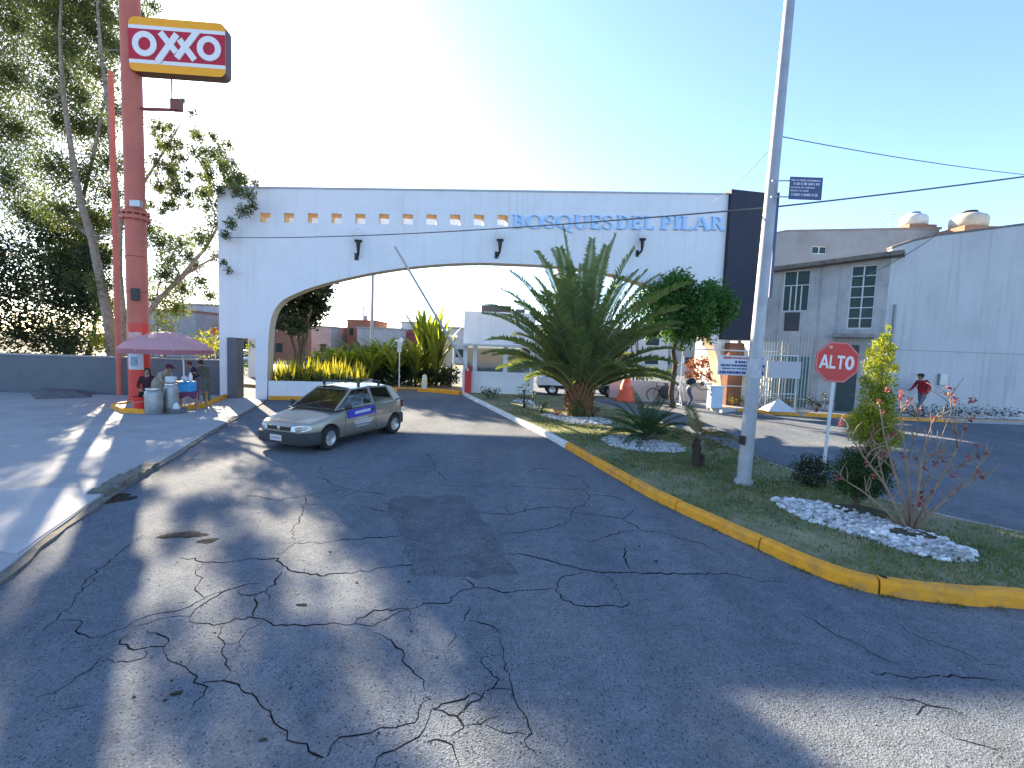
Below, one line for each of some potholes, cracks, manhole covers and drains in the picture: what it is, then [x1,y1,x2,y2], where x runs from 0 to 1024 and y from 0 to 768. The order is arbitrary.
crack [900,698,996,750]
crack [35,464,786,768]
pothole [155,531,210,539]
crack [871,672,991,680]
pothole [104,493,138,504]
